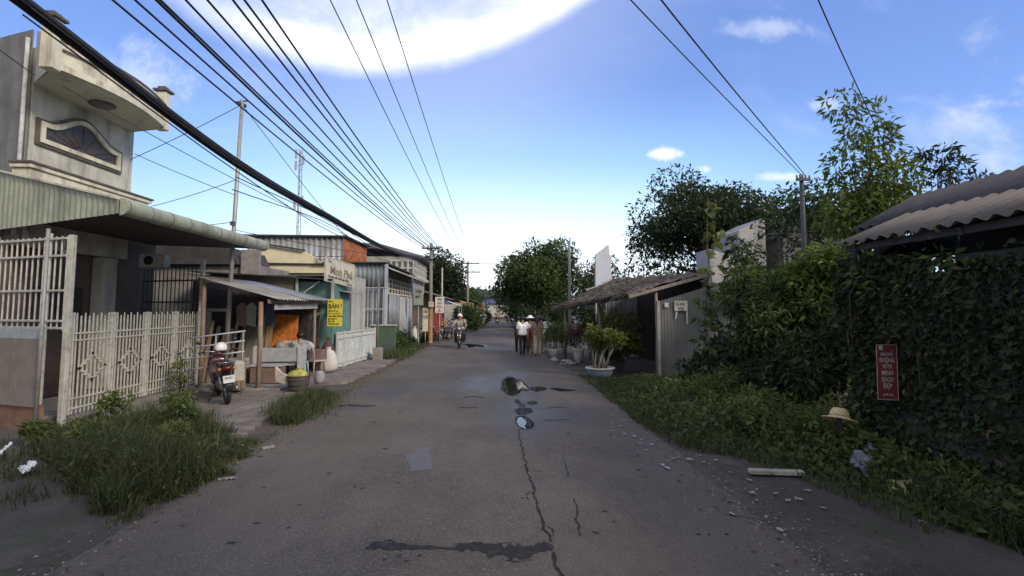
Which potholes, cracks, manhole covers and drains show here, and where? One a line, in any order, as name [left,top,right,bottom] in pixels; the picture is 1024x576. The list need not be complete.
pothole [501,376,529,396]
crack [365,429,581,576]
pothole [515,416,534,429]
